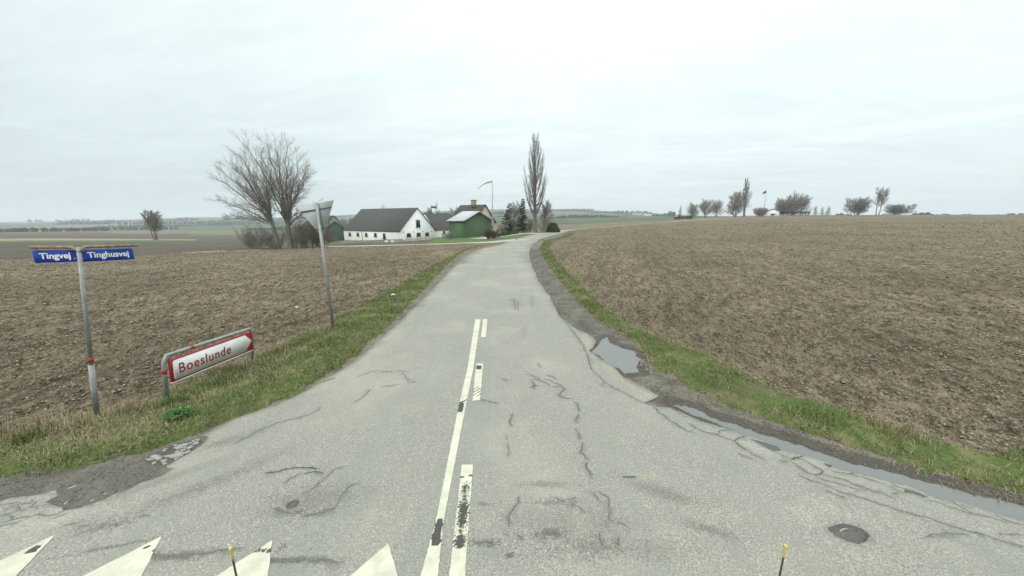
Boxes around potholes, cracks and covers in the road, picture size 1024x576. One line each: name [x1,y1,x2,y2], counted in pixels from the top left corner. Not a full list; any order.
crack [648,404,1020,546]
crack [267,467,358,516]
crack [529,364,626,547]
